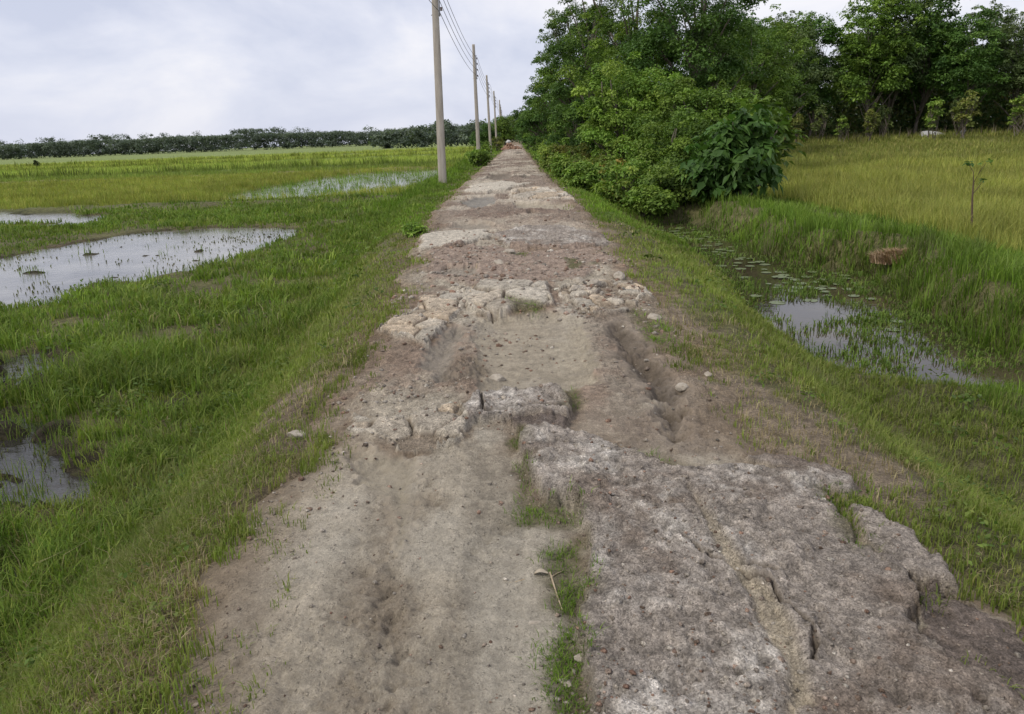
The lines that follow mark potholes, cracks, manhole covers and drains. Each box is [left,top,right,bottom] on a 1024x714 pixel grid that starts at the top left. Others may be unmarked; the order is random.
pothole [411,320,469,384]
crack [906,595,923,634]
pothole [594,312,698,447]
crack [681,532,822,661]
